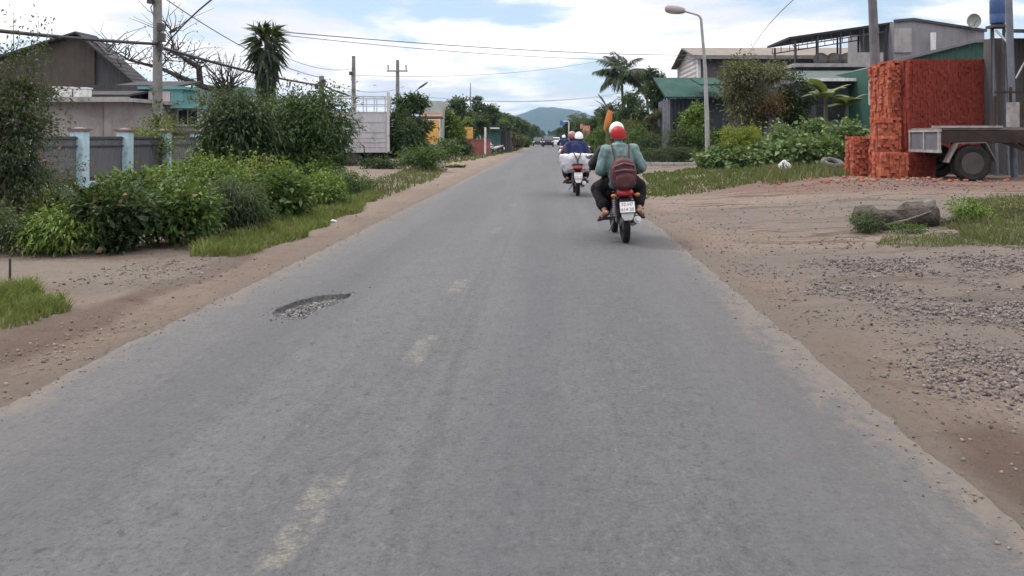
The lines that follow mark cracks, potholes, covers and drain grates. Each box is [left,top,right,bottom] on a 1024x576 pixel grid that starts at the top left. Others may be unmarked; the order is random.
pothole [261,287,370,323]
